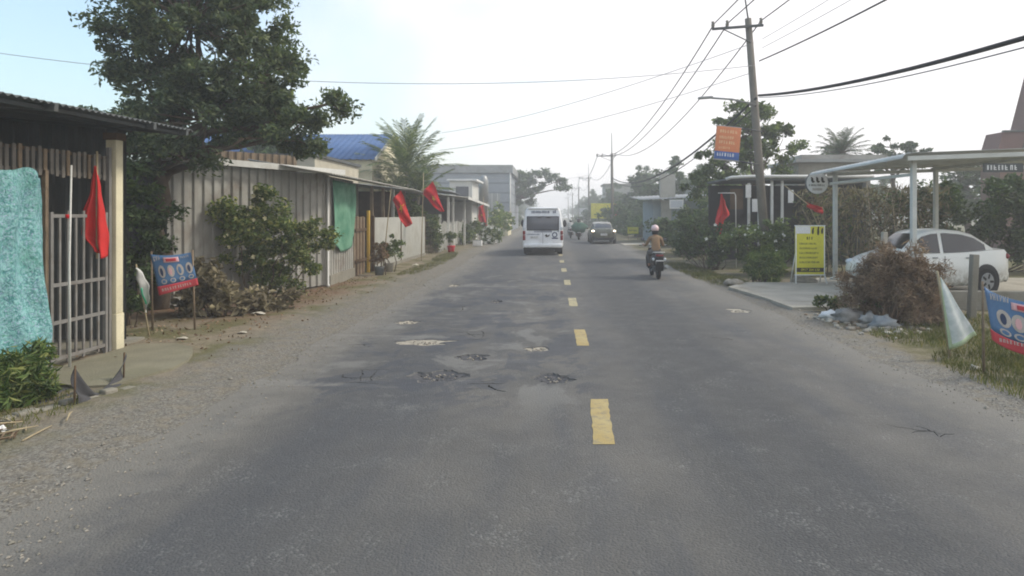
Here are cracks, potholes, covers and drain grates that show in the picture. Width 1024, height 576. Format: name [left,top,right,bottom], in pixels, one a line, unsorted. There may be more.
pothole [406,369,470,384]
pothole [530,373,577,384]
crack [341,369,387,384]
